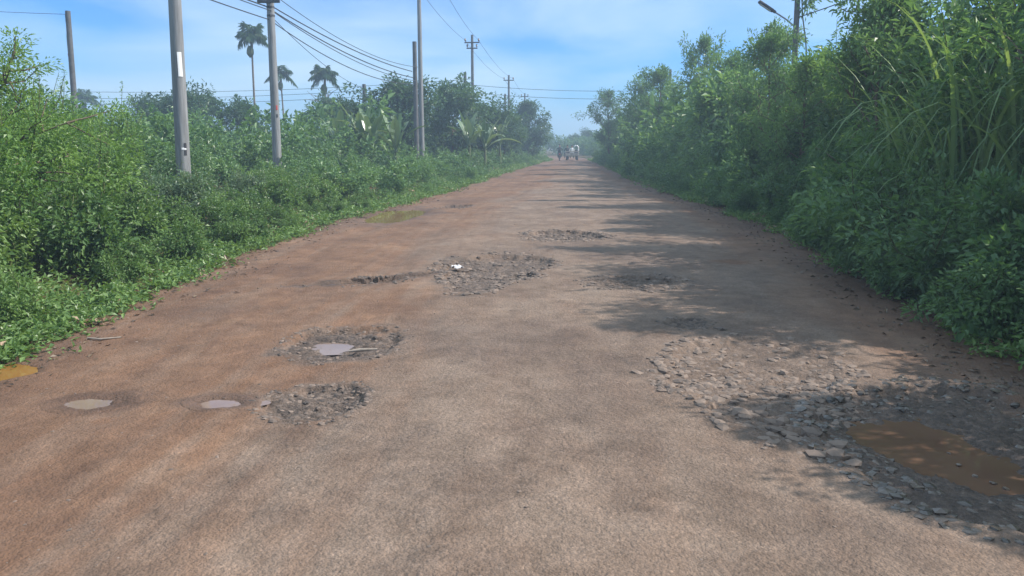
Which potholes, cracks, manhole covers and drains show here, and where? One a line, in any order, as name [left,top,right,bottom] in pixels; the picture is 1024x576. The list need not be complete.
pothole [271,324,414,365]
pothole [341,206,450,226]
pothole [427,251,565,298]
pothole [247,381,375,426]
pothole [39,391,145,416]
pothole [785,374,1024,545]
pothole [0,361,56,383]
pothole [631,329,872,467]
pothole [179,393,271,412]
pothole [516,229,618,242]
pothole [573,273,697,293]
